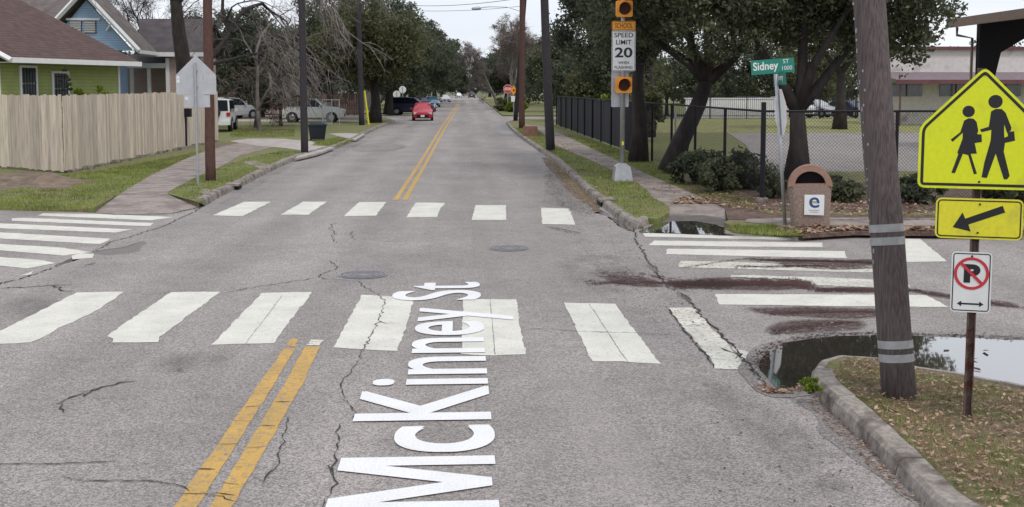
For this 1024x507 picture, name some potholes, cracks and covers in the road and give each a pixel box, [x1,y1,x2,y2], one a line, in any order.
manhole cover [339,270,387,279]
crack [0,393,289,502]
crack [56,380,137,412]
